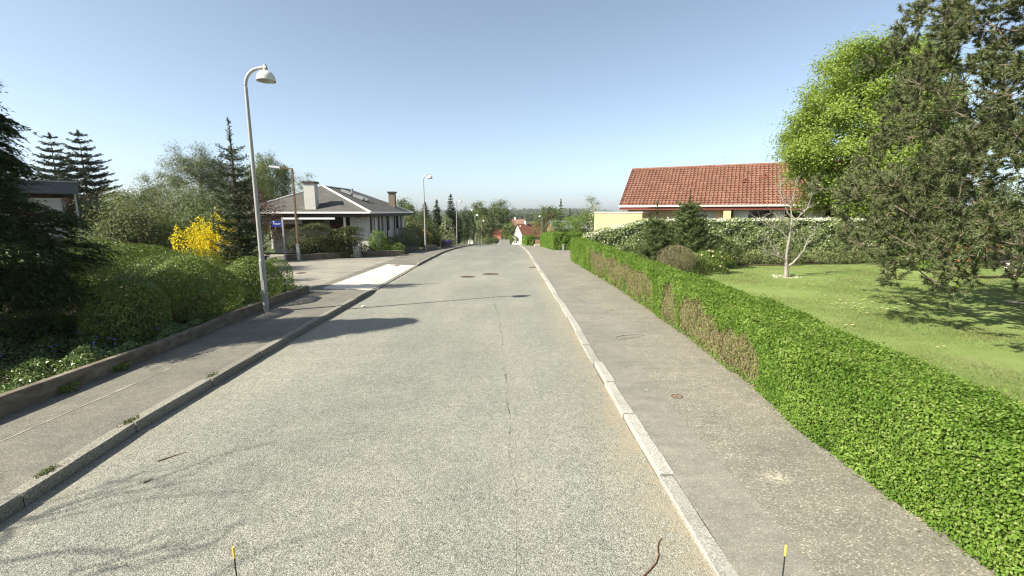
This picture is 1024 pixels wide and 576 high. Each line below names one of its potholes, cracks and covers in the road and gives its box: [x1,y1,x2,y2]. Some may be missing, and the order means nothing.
crack [493,299,518,565]
